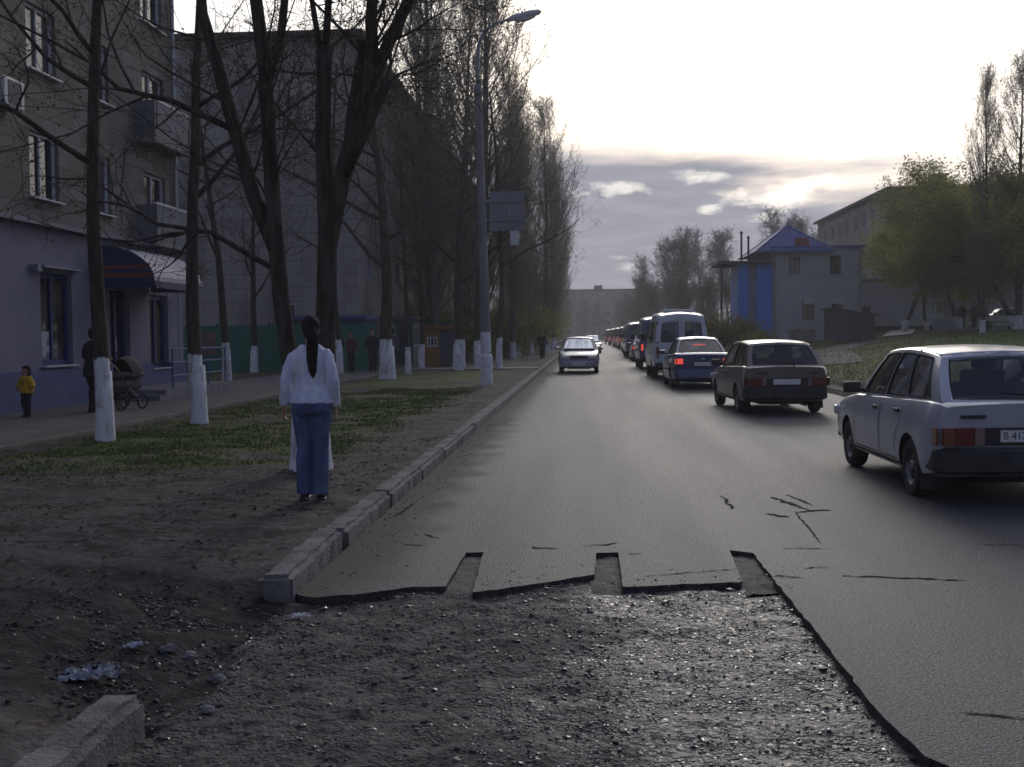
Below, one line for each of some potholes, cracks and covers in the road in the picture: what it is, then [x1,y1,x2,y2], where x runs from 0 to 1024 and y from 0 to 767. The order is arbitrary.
pothole [107,581,922,767]
crack [776,567,957,580]
crack [766,494,832,549]
